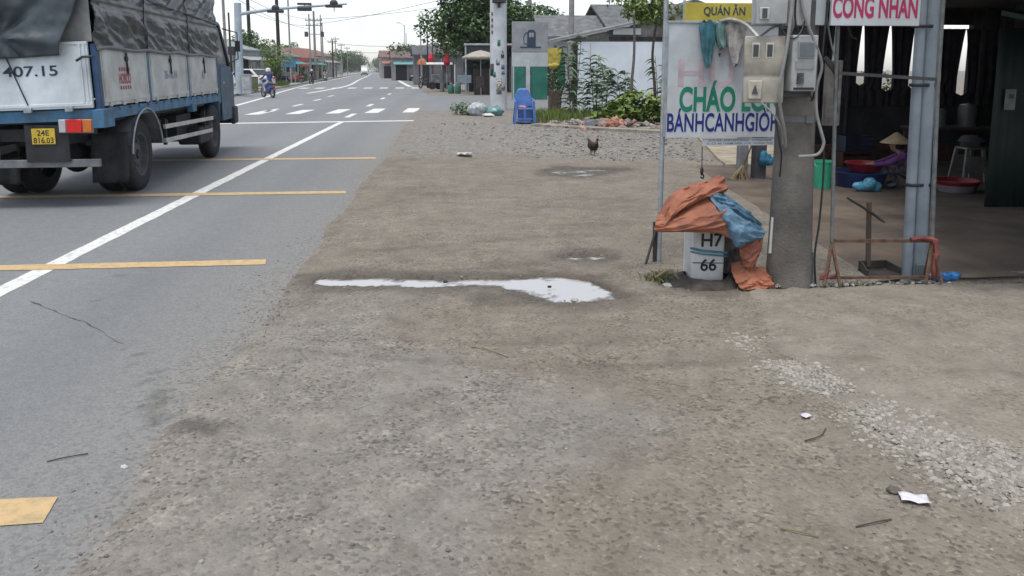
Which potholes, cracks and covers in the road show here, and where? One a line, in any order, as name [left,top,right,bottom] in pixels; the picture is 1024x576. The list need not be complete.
crack [31,301,124,345]
pothole [552,251,616,262]
pothole [539,167,634,178]
pothole [305,271,637,305]
